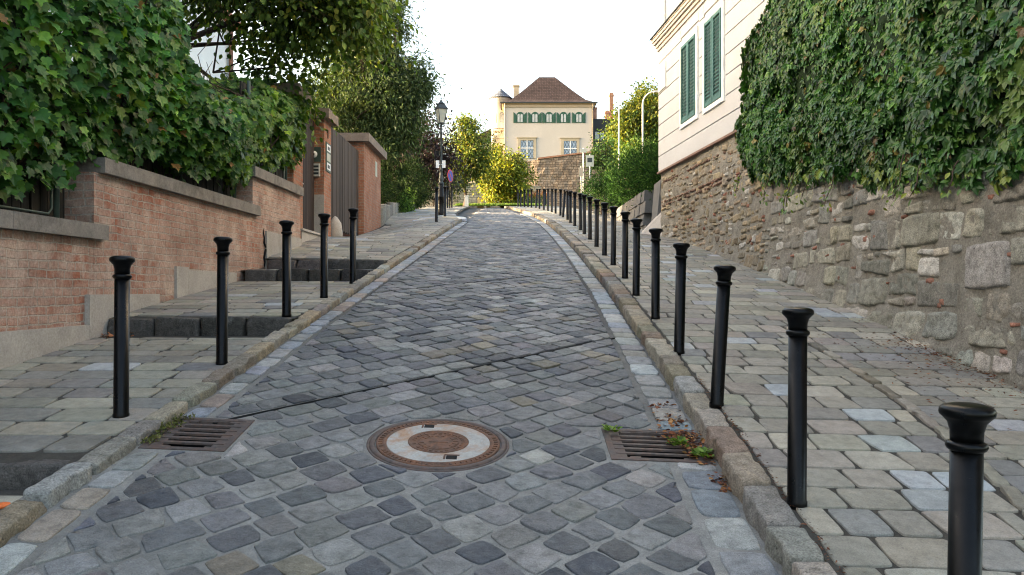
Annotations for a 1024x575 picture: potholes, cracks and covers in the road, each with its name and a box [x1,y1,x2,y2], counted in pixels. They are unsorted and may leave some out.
manhole cover [366,419,509,472]
drain grate [601,428,713,464]
drain grate [138,417,255,452]
